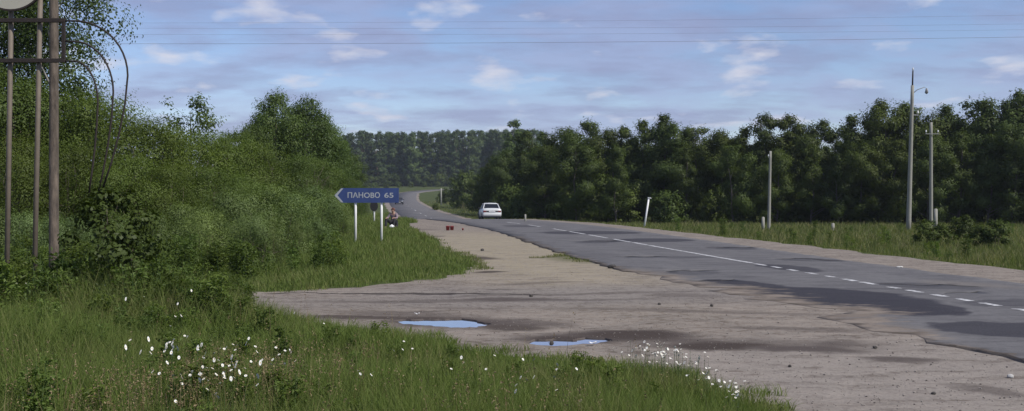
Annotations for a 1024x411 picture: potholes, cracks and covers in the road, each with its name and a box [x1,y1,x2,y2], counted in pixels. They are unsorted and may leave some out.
pothole [527,337,612,346]
pothole [394,318,491,328]
